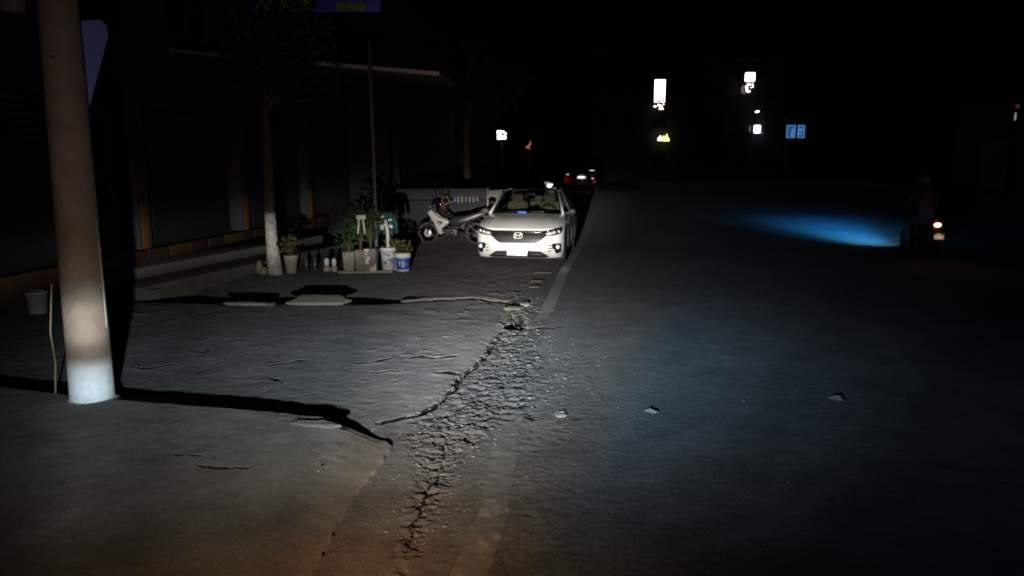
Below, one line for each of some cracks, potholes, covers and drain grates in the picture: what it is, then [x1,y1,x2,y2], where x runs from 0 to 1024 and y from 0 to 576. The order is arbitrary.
crack [380,332,544,554]
